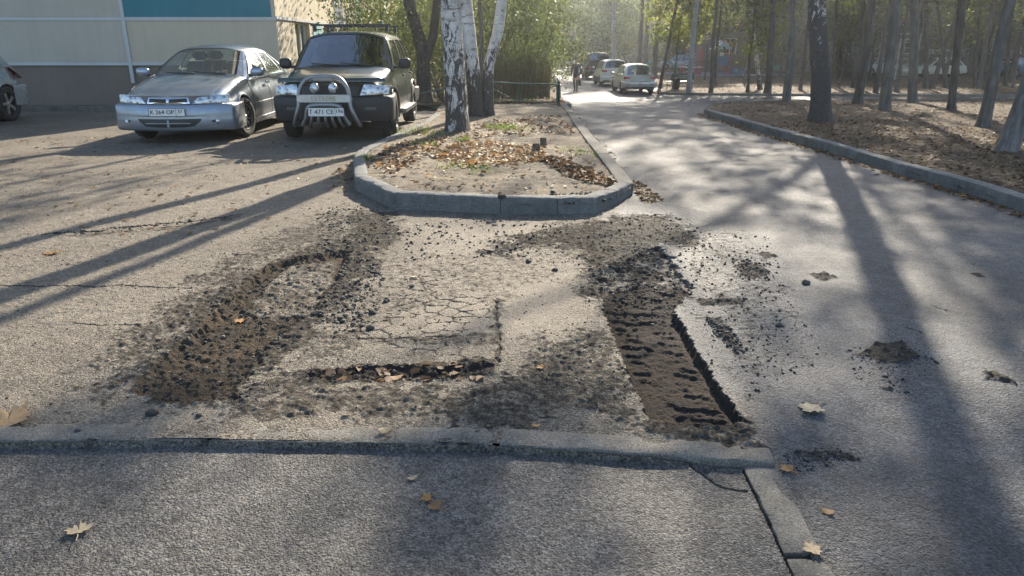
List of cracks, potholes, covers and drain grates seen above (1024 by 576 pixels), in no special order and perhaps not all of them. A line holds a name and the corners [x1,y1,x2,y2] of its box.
crack [40,214,243,235]
crack [332,267,502,367]
pothole [581,246,748,429]
crack [688,461,747,493]
pothole [130,249,353,404]
pothole [303,360,494,383]
